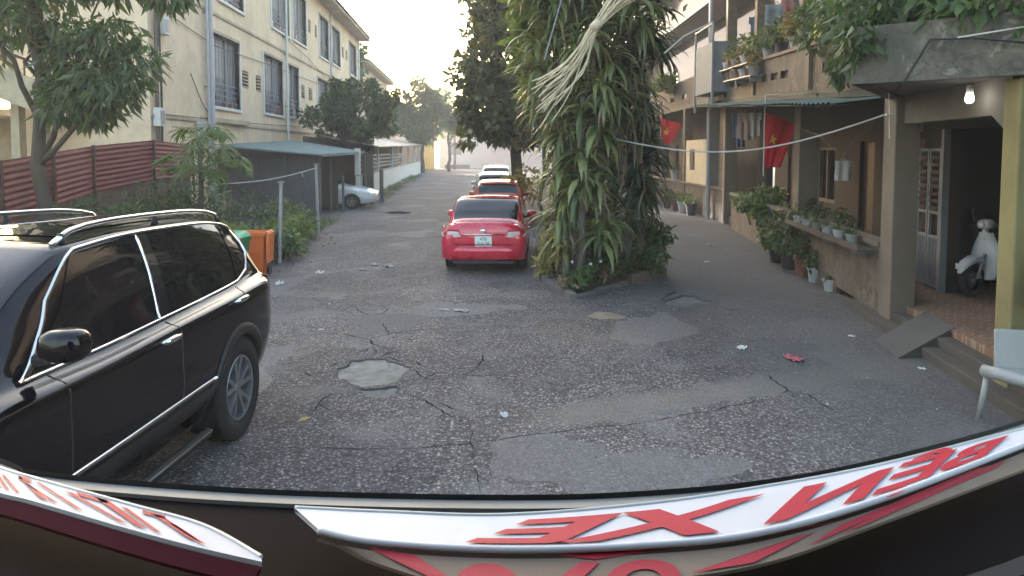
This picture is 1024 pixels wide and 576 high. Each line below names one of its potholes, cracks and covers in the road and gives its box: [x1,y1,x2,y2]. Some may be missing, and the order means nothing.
pothole [358,386,399,398]
crack [769,376,838,412]
pothole [664,295,712,306]
pothole [336,358,411,387]
crack [271,303,508,425]
